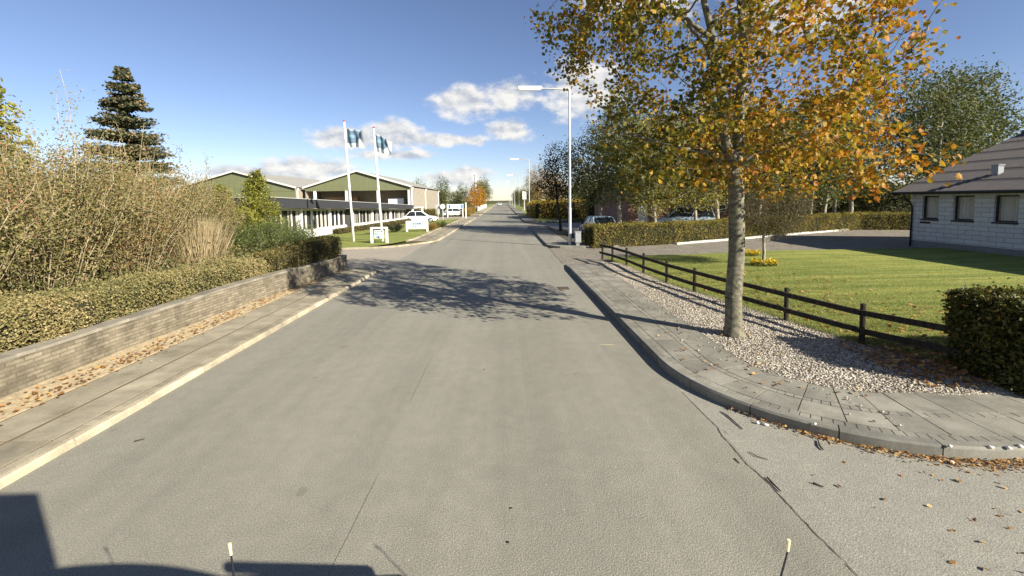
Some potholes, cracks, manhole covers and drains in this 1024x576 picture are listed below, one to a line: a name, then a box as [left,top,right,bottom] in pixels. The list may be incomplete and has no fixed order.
crack [682,392,858,576]
